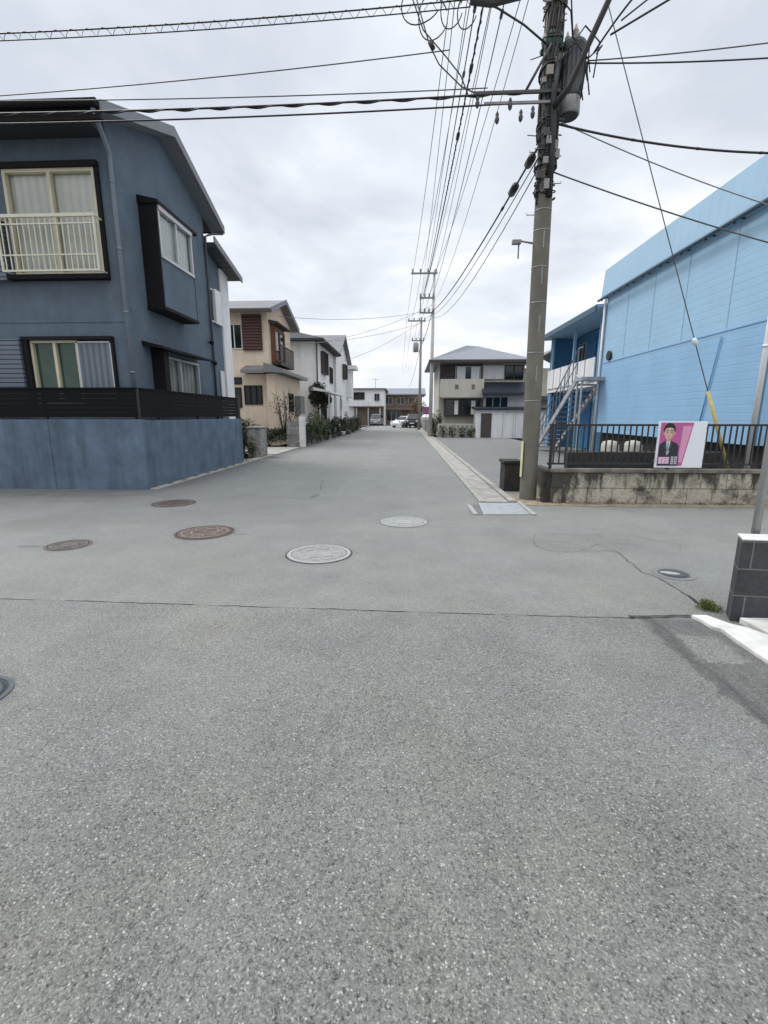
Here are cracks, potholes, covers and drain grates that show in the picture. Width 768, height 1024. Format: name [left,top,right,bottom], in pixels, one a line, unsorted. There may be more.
manhole cover [285,544,353,564]
manhole cover [151,499,196,507]
manhole cover [0,676,15,700]
crack [5,533,704,618]
utility cover [651,567,697,581]
manhole cover [43,539,93,551]
manhole cover [379,516,428,528]
manhole cover [174,525,235,540]
